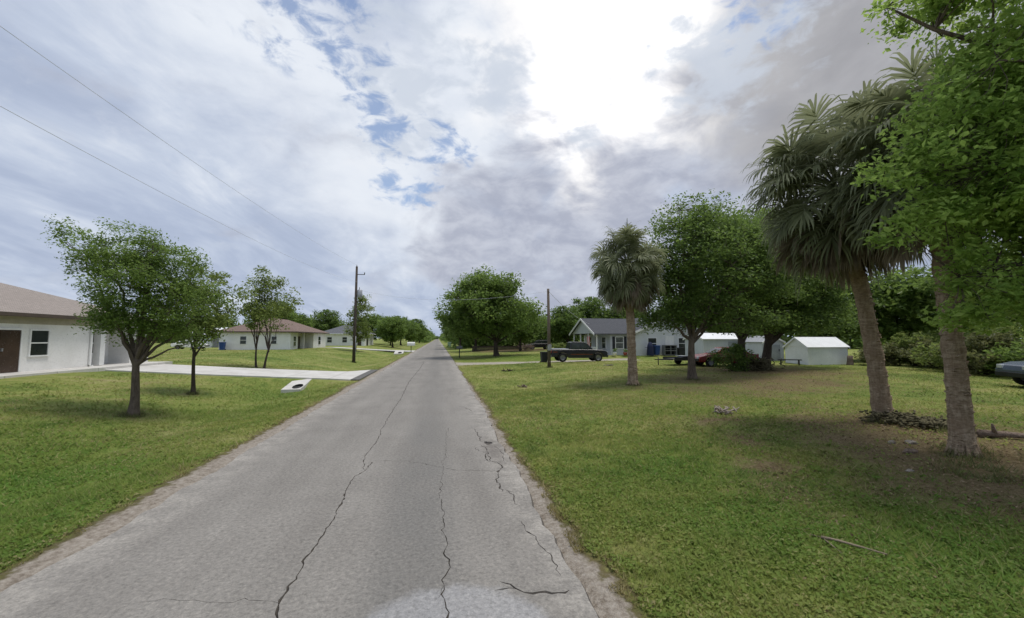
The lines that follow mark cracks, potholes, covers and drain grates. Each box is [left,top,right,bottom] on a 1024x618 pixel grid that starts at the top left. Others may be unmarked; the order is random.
crack [148,364,423,618]
crack [412,406,569,618]
